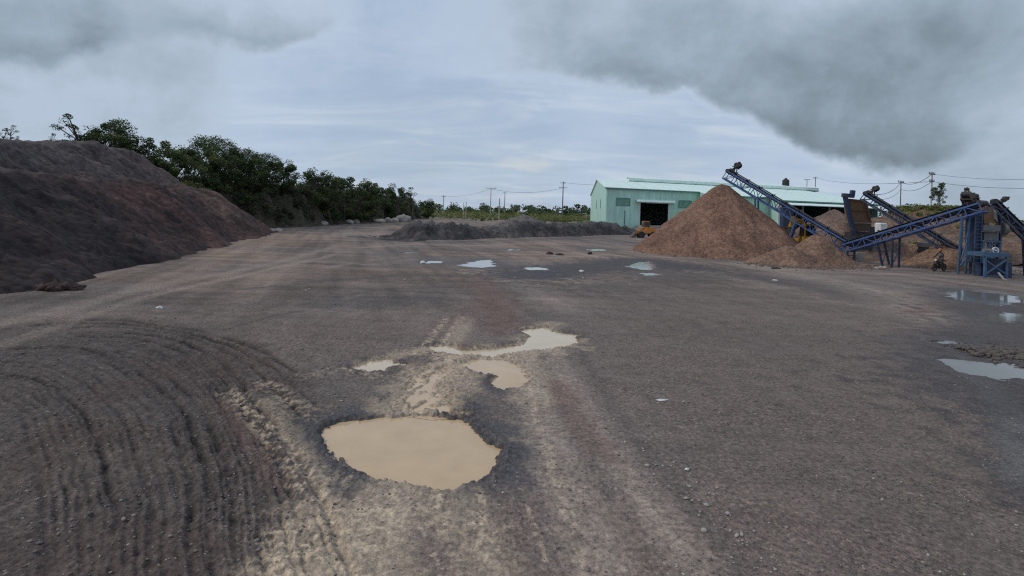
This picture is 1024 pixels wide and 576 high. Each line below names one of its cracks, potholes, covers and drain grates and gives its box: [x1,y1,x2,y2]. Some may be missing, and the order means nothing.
pothole [452,354,536,390]
pothole [417,324,587,359]
pothole [315,409,509,492]
pothole [344,355,410,373]
